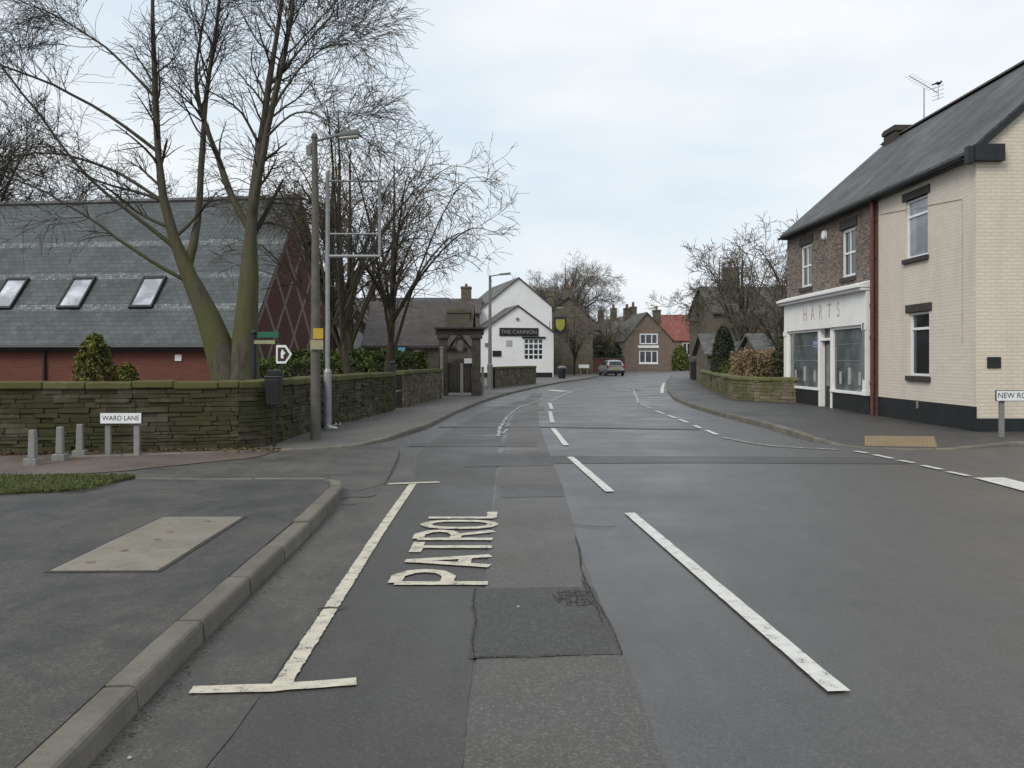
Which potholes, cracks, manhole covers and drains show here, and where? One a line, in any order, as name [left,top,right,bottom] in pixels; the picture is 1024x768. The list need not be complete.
manhole cover [44,516,247,573]
